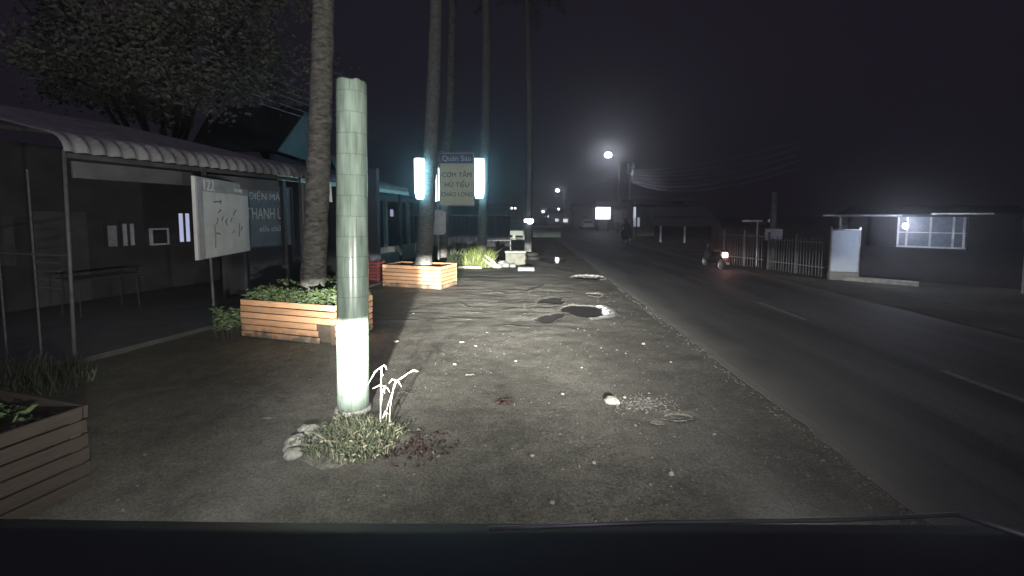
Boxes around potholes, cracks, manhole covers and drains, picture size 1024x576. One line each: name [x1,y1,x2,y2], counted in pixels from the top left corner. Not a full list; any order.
pothole [531,312,570,324]
pothole [557,304,617,320]
pothole [661,412,696,422]
pothole [533,297,569,305]
pothole [538,256,568,264]
